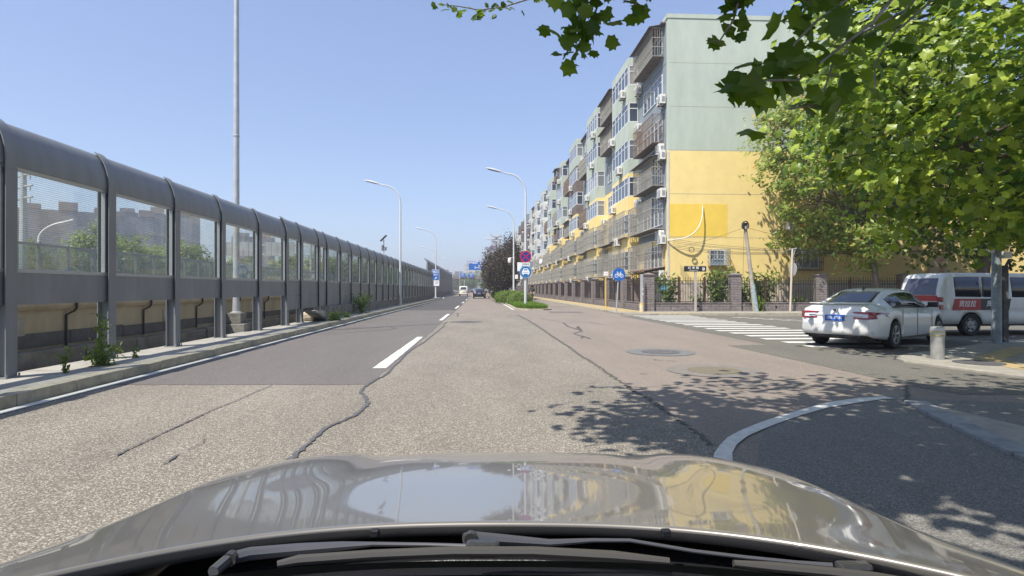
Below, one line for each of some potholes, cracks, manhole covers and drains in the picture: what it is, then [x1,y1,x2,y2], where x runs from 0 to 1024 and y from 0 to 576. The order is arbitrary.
manhole cover [666,364,764,377]
crack [116,385,271,464]
